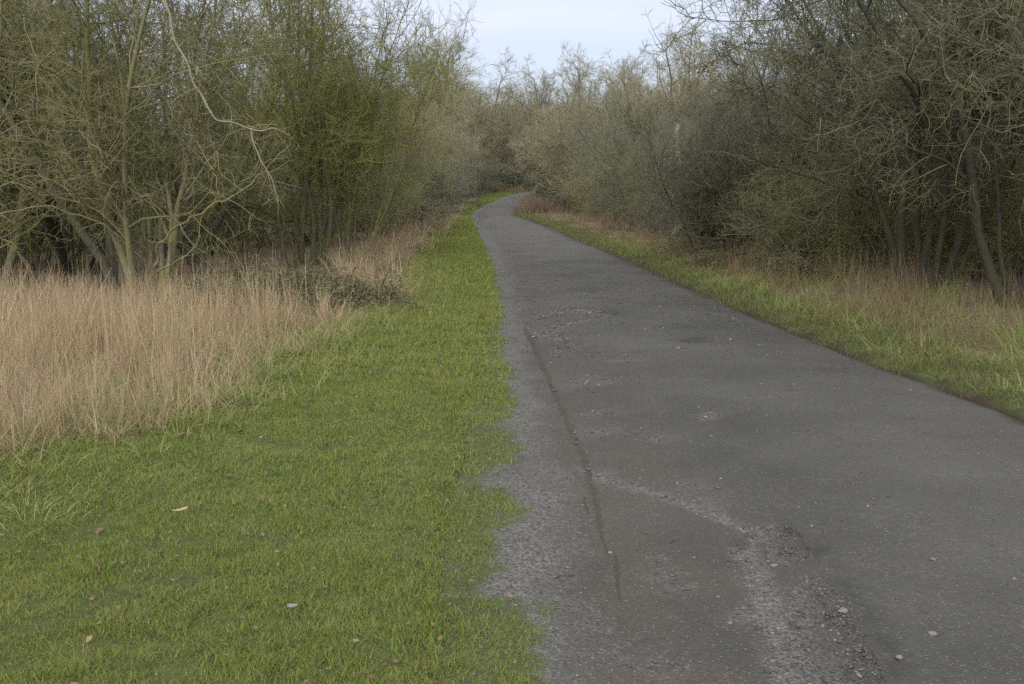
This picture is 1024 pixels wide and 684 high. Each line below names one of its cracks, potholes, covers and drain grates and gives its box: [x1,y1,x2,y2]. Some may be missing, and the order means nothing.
pothole [784,574,889,684]
crack [523,327,621,602]
pothole [746,524,811,567]
pothole [552,309,594,325]
